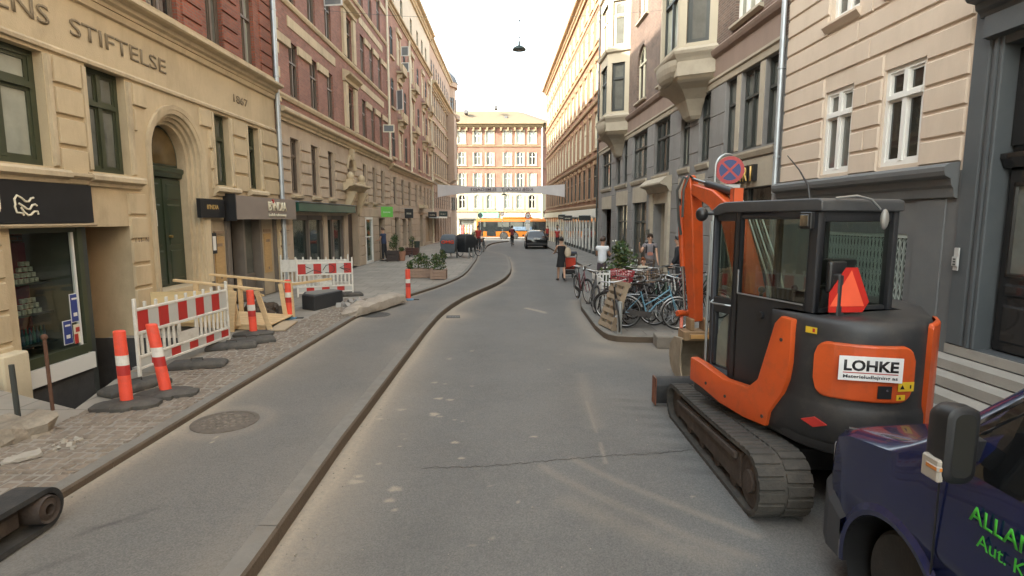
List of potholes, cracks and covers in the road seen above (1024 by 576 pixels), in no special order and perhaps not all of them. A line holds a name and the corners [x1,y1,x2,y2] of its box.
crack [413,449,691,469]
manhole cover [189,410,260,434]
